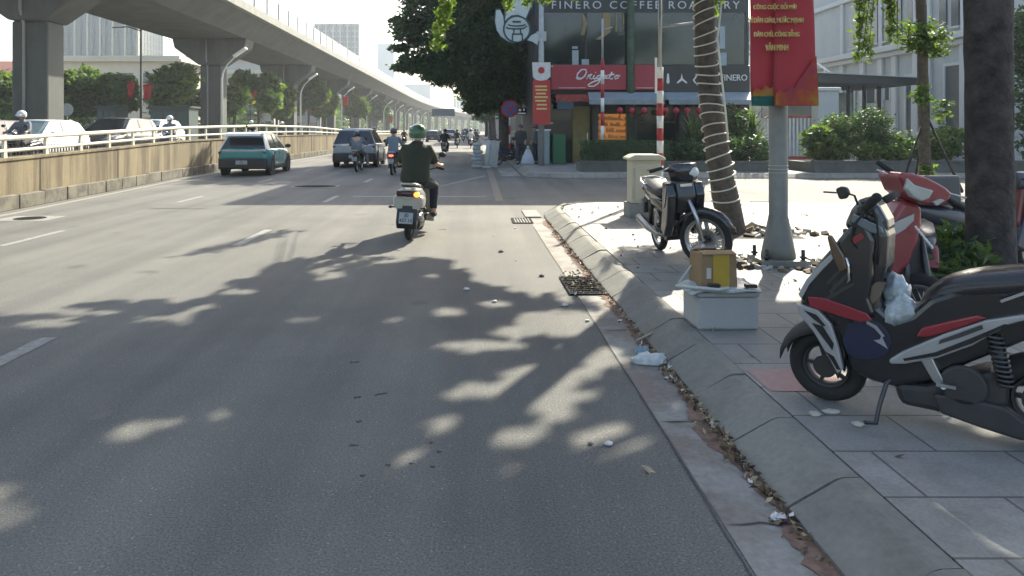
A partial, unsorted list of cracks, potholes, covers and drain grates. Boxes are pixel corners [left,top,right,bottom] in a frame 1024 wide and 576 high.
drain grate [559,276,607,295]
